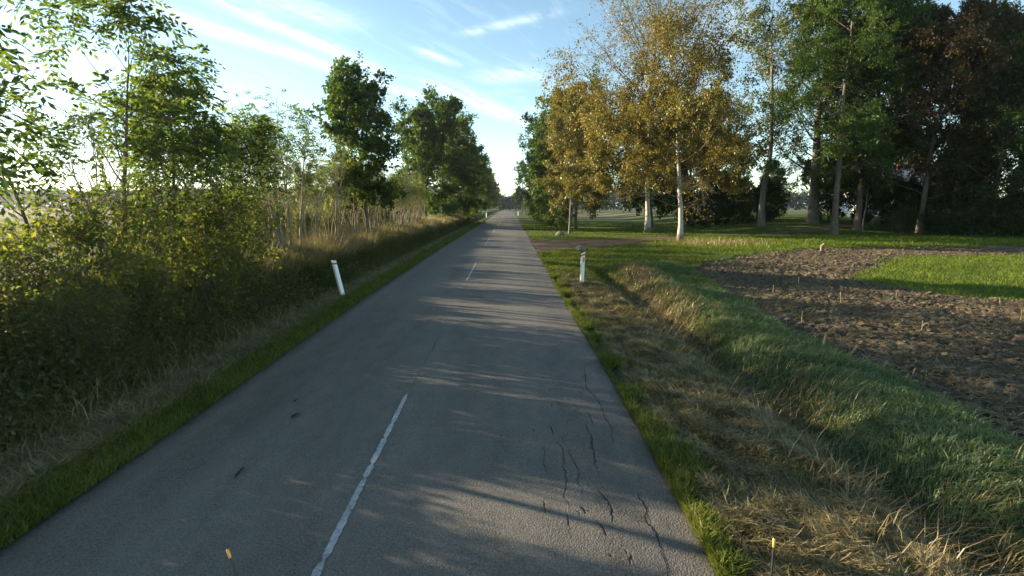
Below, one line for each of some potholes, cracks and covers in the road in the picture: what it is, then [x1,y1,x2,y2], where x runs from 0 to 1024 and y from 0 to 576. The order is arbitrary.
crack [529,370,668,574]
